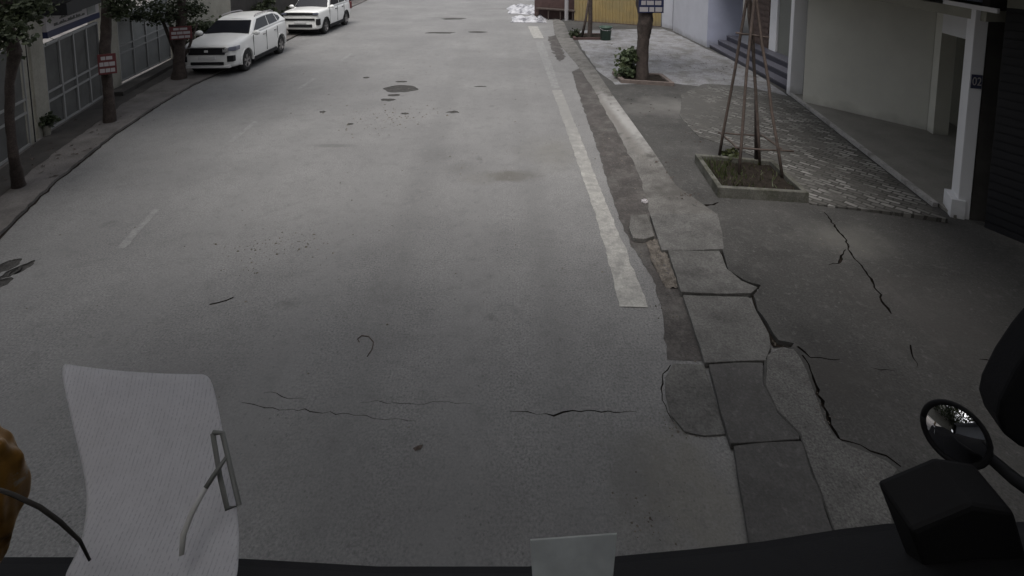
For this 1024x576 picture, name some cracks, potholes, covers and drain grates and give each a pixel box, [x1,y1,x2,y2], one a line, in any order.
crack [752,295,901,467]
crack [824,212,892,314]
crack [241,392,469,421]
